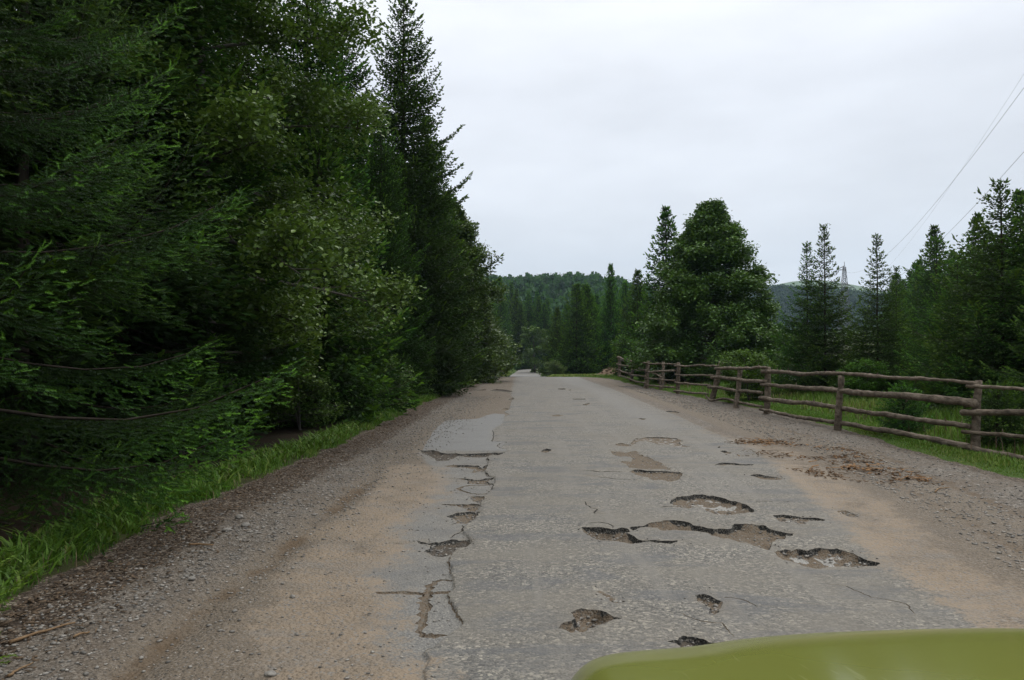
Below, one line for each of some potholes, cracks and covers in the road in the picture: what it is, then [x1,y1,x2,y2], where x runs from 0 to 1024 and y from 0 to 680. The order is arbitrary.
pothole [668,636,712,647]
pothole [631,437,691,447]
pothole [630,520,793,550]
pothole [611,451,670,470]
pothole [447,512,477,524]
crack [375,579,453,639]
pothole [418,539,471,557]
pothole [670,494,754,515]
pothole [775,548,880,569]
pothole [695,594,723,615]
crack [825,583,915,614]
pothole [773,515,824,525]
